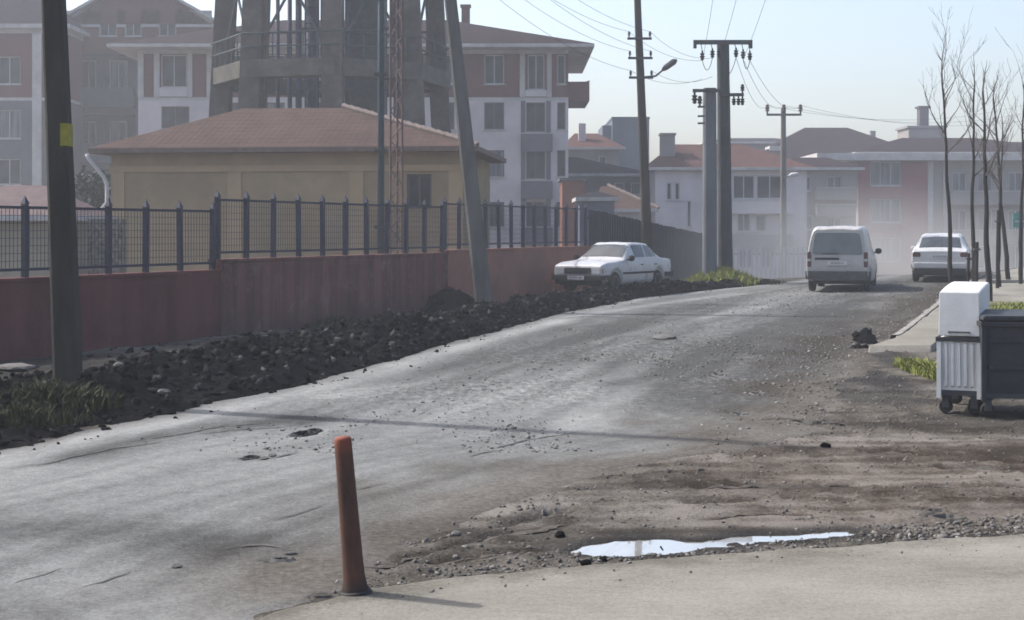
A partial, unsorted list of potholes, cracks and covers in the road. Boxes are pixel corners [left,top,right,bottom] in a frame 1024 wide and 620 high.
crack [469,433,570,457]
pothole [927,513,969,523]
crack [26,423,292,466]
